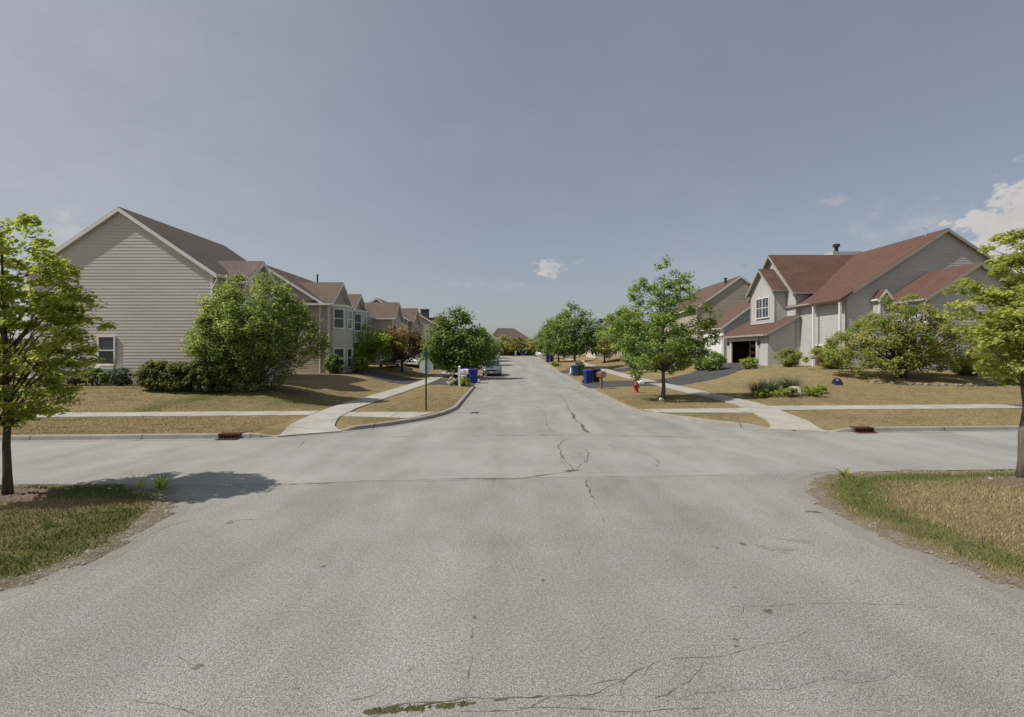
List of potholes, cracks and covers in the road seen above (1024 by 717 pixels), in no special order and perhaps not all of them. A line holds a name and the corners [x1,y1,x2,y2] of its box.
drain grate [215,432,245,440]
crack [427,387,666,524]
crack [349,628,807,717]
